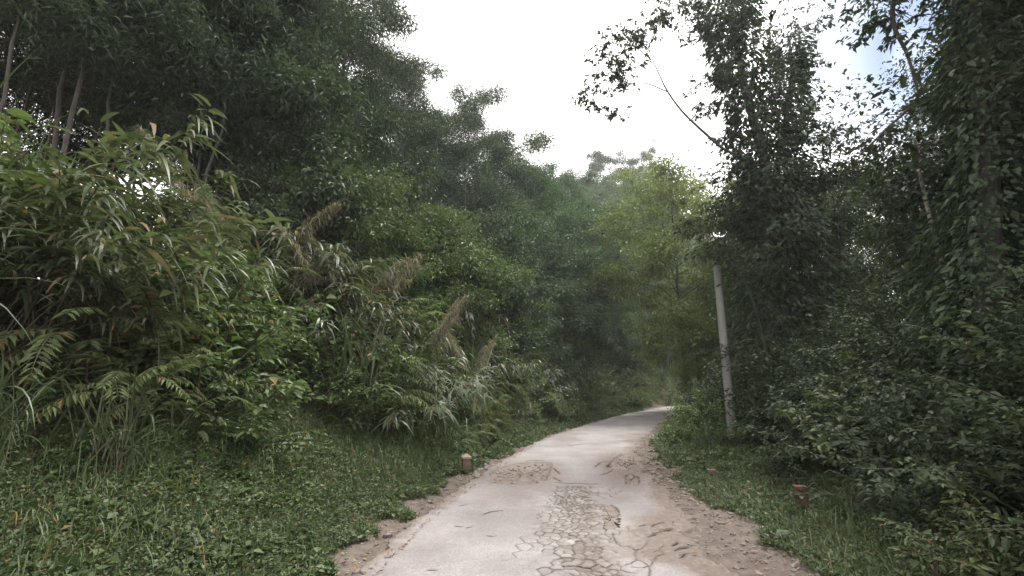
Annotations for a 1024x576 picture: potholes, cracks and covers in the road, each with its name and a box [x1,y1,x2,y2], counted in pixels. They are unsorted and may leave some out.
crack [508,460,693,576]
